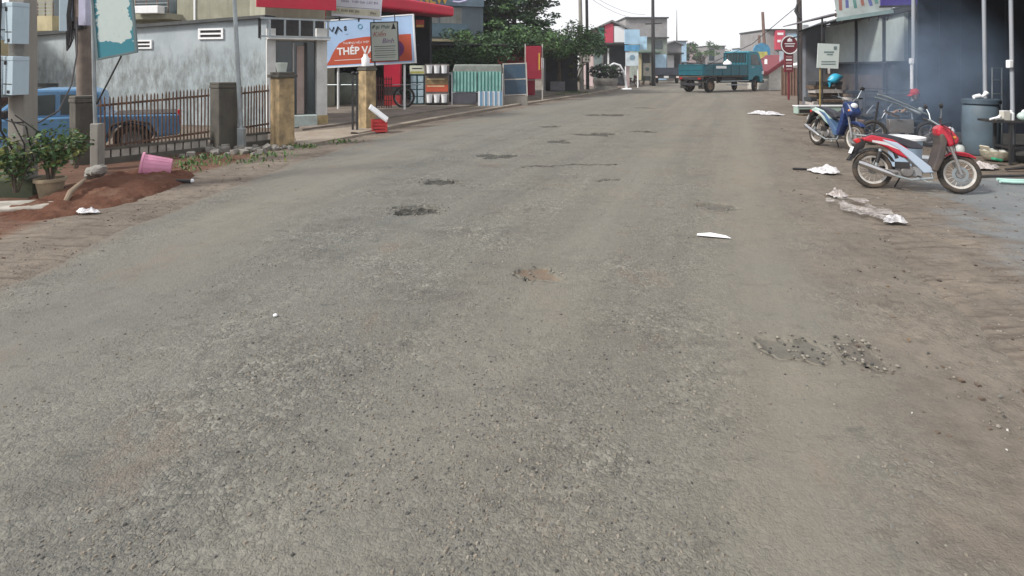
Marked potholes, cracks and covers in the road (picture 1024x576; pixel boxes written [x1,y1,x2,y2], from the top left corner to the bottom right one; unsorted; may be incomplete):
pothole [467,152,522,160]
pothole [418,178,463,186]
pothole [737,331,847,366]
pothole [691,200,744,213]
pothole [511,266,566,283]
pothole [387,203,449,217]
pothole [833,334,900,374]
